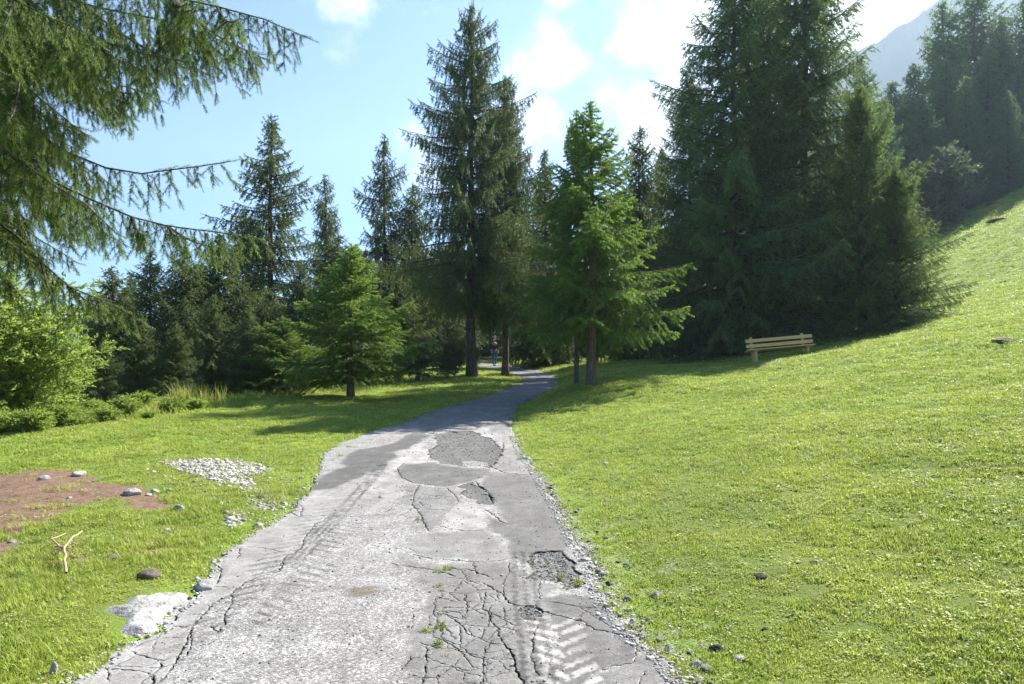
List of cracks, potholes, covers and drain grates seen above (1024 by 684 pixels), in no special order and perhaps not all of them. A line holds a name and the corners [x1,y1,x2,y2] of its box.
pothole [518,606,543,621]
crack [401,567,582,684]
crack [553,602,645,684]
pothole [526,550,585,590]
pothole [459,483,494,505]
